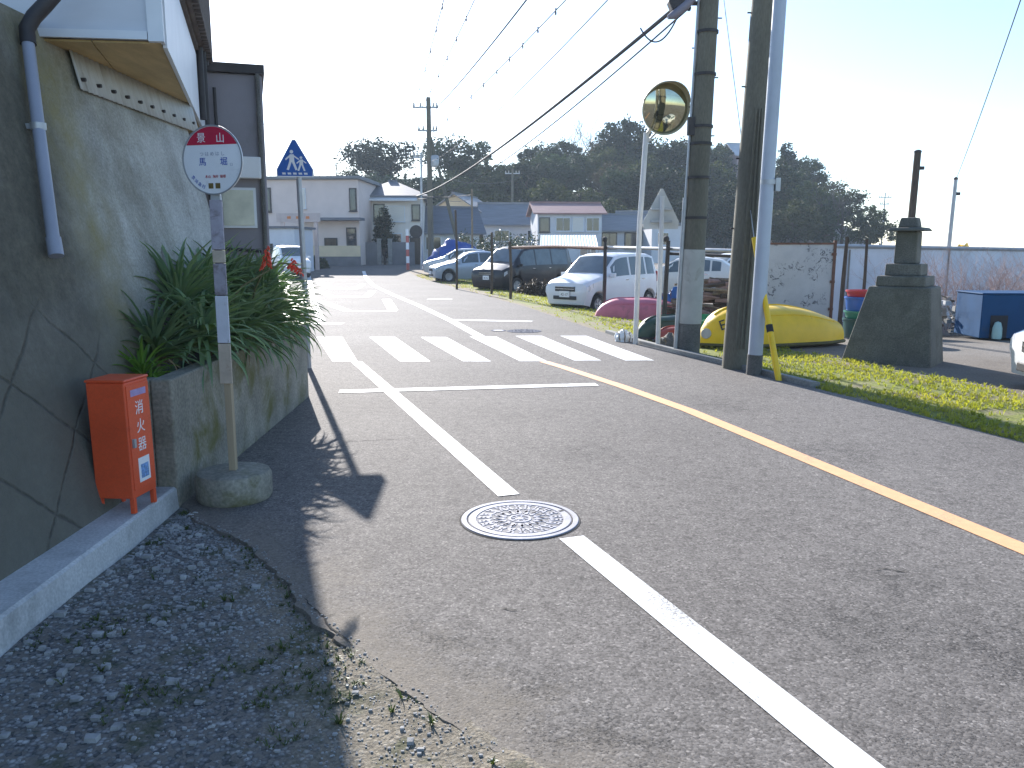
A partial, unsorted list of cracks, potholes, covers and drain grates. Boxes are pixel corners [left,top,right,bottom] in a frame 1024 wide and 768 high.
crack [306,599,353,645]
manhole cover [459,500,581,541]
